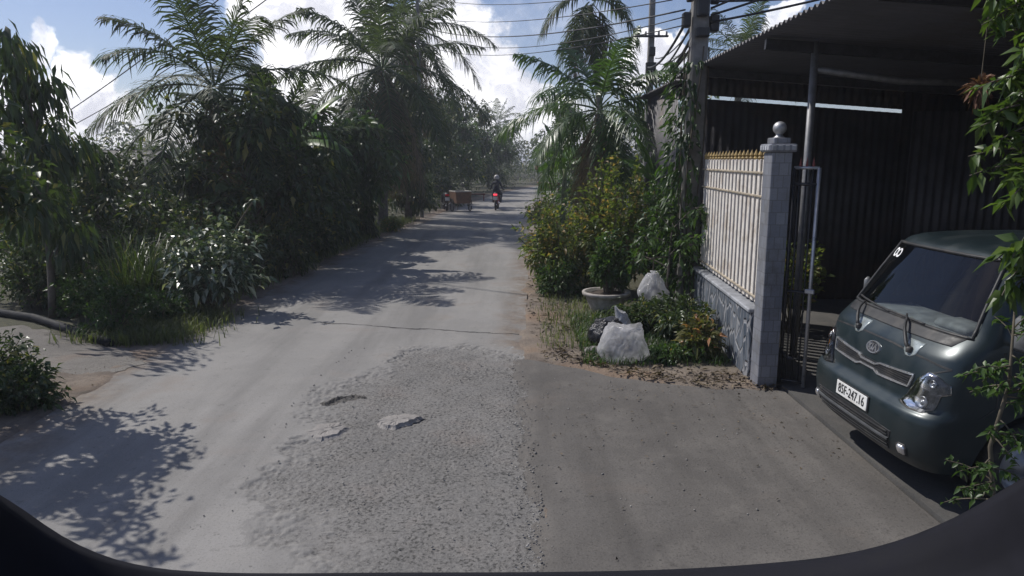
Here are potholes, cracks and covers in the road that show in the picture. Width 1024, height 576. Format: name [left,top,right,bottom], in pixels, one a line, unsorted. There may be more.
pothole [220,342,542,573]
crack [324,323,519,335]
